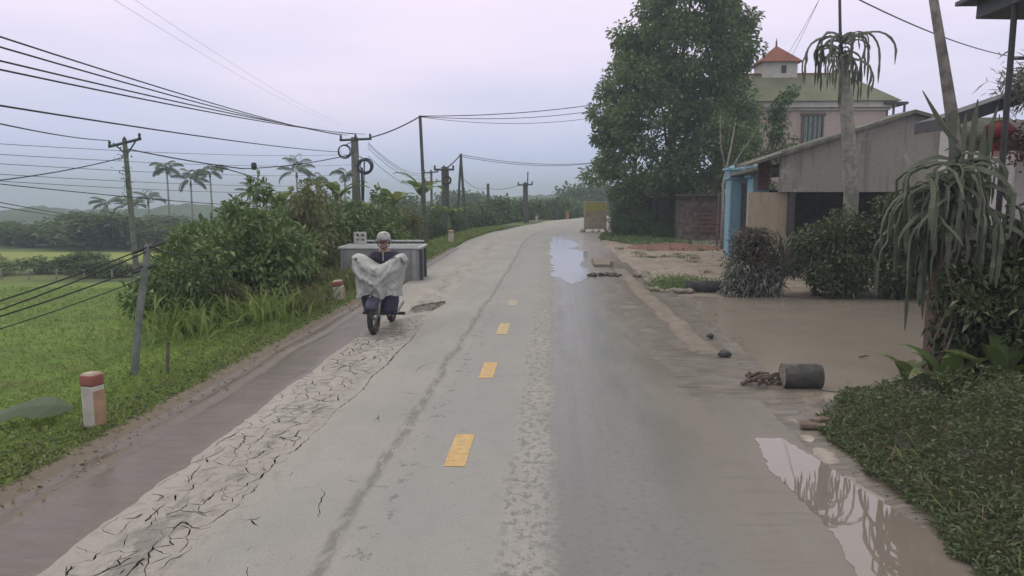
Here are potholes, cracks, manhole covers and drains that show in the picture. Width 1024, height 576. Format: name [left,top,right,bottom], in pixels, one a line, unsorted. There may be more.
pothole [409,301,446,313]
crack [65,318,424,576]
